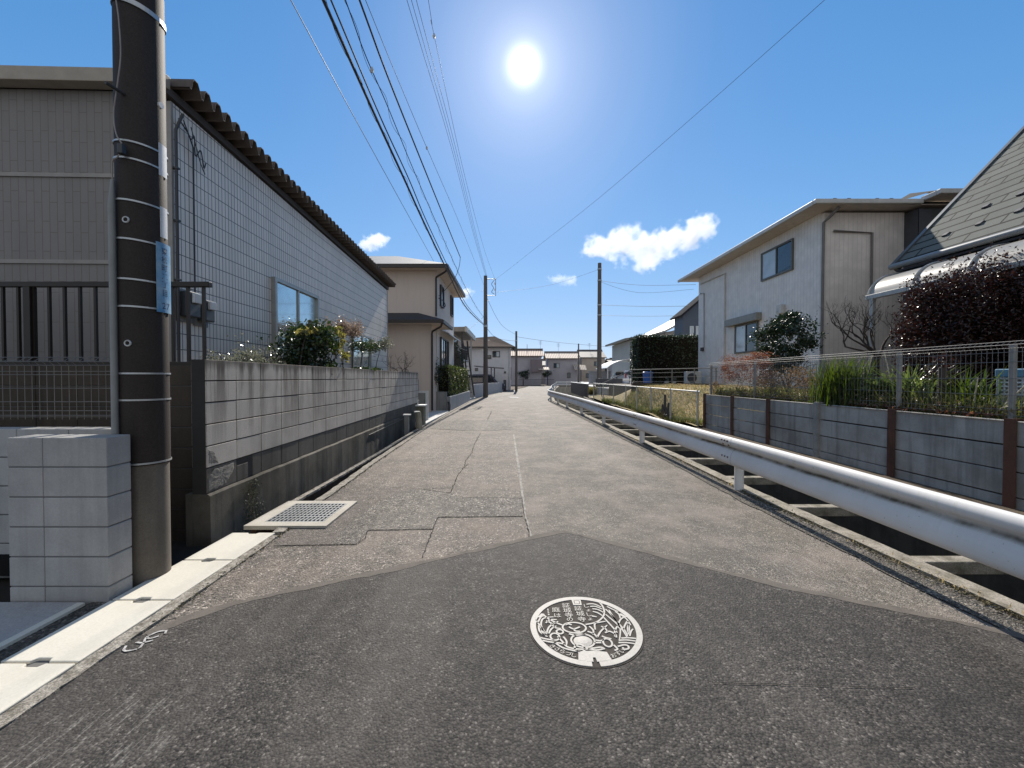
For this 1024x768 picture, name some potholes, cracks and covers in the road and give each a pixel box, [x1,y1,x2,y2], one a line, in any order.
drain grate [244,501,357,530]
manhole cover [529,597,645,669]
crack [397,411,492,493]
crack [276,516,475,557]
